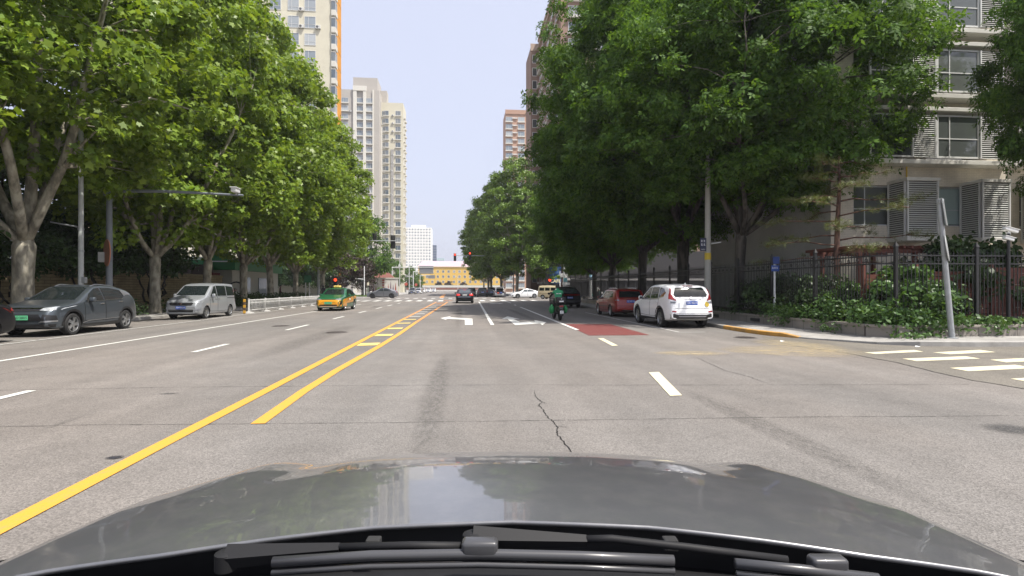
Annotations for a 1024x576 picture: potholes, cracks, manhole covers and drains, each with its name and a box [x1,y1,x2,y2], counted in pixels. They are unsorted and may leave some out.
crack [534,390,572,452]
